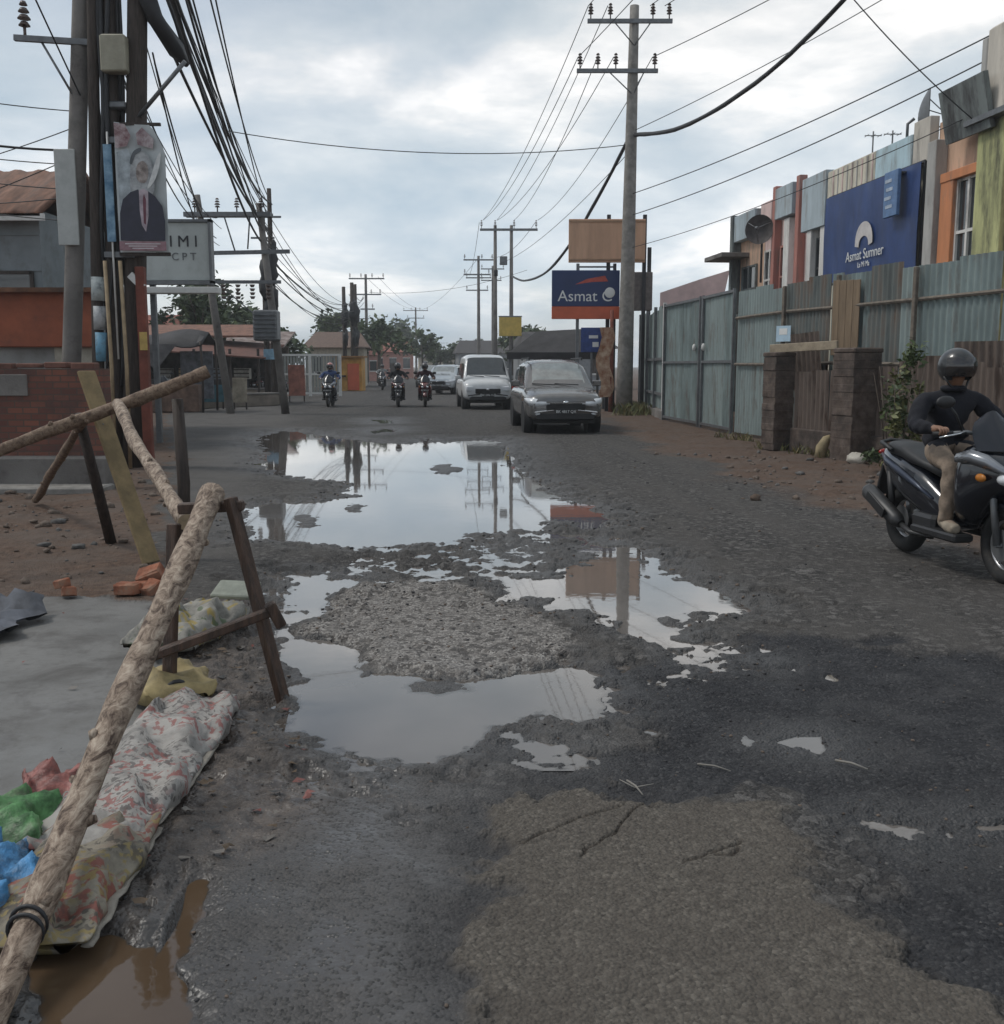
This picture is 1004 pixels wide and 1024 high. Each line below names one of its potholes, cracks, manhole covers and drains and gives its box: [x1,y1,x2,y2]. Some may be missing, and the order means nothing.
pothole [155,426,694,583]
crack [681,838,743,863]
crack [517,802,650,857]
pothole [177,554,725,814]
pothole [741,720,868,766]
